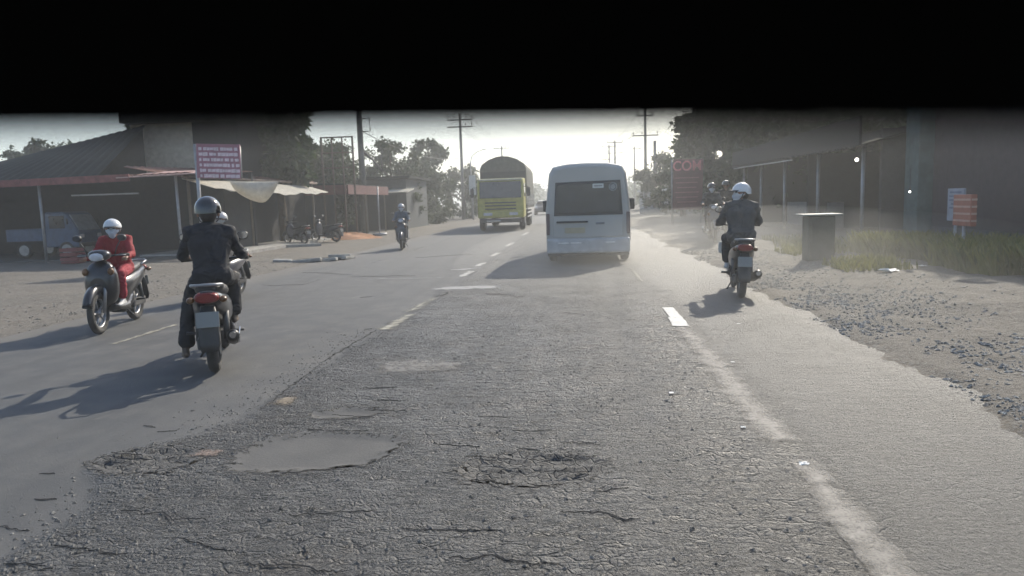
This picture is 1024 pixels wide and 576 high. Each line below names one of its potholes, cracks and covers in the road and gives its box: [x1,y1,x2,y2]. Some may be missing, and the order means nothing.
crack [180,538,334,572]
crack [120,510,207,521]
crack [528,470,629,492]
crack [449,554,559,565]
pothole [443,447,623,490]
crack [309,387,407,431]
crack [560,510,640,521]
crack [4,545,128,569]
